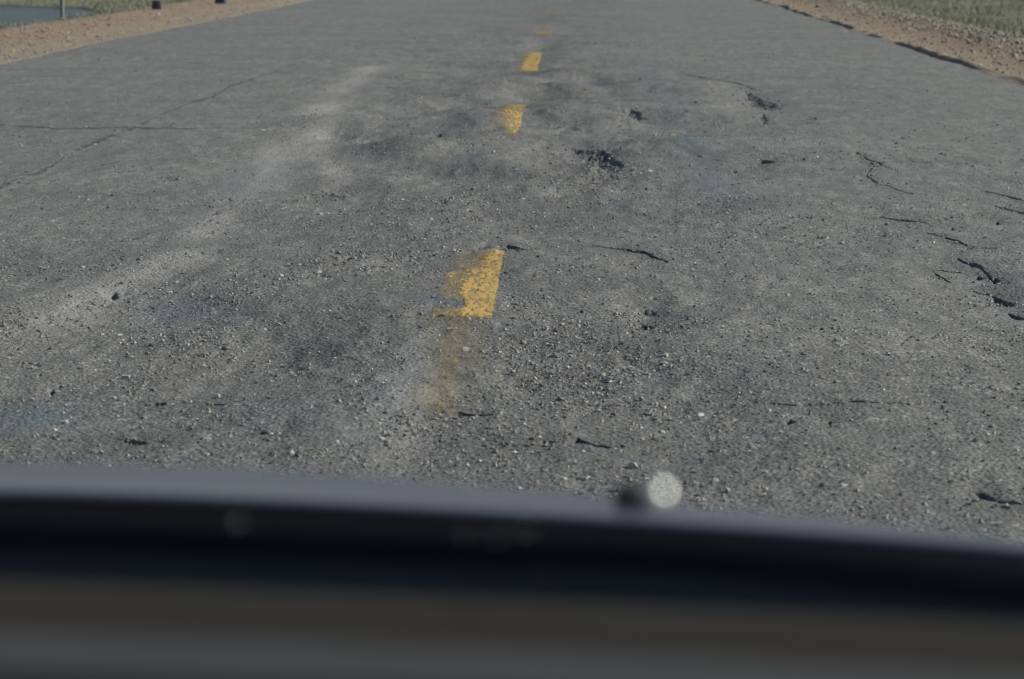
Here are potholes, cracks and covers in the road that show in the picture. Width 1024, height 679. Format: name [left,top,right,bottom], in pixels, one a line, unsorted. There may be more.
crack [984,191,1024,214]
pothole [736,92,780,110]
crack [855,152,910,194]
crack [596,245,669,263]
crack [881,217,998,295]
pothole [619,109,647,121]
pothole [556,148,626,175]
crack [996,501,1021,509]
